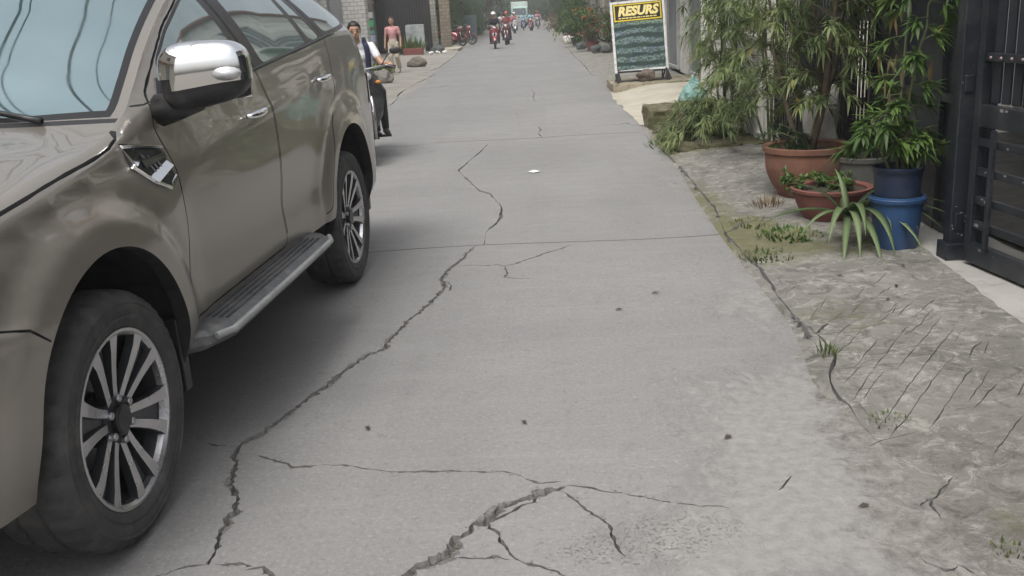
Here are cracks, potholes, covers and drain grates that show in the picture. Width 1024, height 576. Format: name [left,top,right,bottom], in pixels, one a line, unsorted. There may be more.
crack [156,145,740,576]
crack [920,477,953,516]
